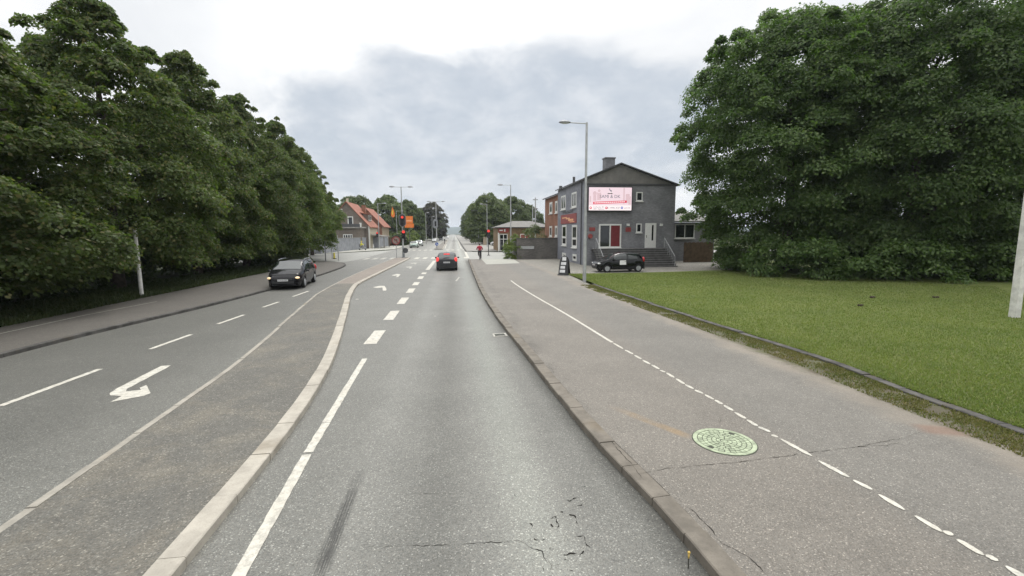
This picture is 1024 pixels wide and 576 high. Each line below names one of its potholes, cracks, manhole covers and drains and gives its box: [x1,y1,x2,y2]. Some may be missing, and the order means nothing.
crack [629,434,913,475]
manhole cover [692,428,758,456]
crack [371,486,590,575]
